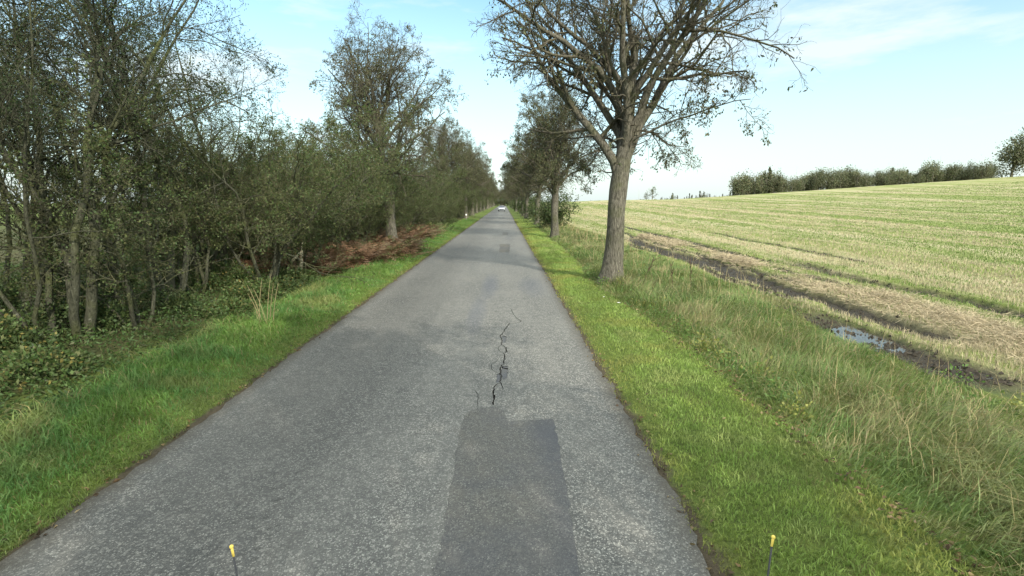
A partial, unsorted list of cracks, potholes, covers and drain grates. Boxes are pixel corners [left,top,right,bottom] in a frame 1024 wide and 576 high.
crack [467,310,521,418]
